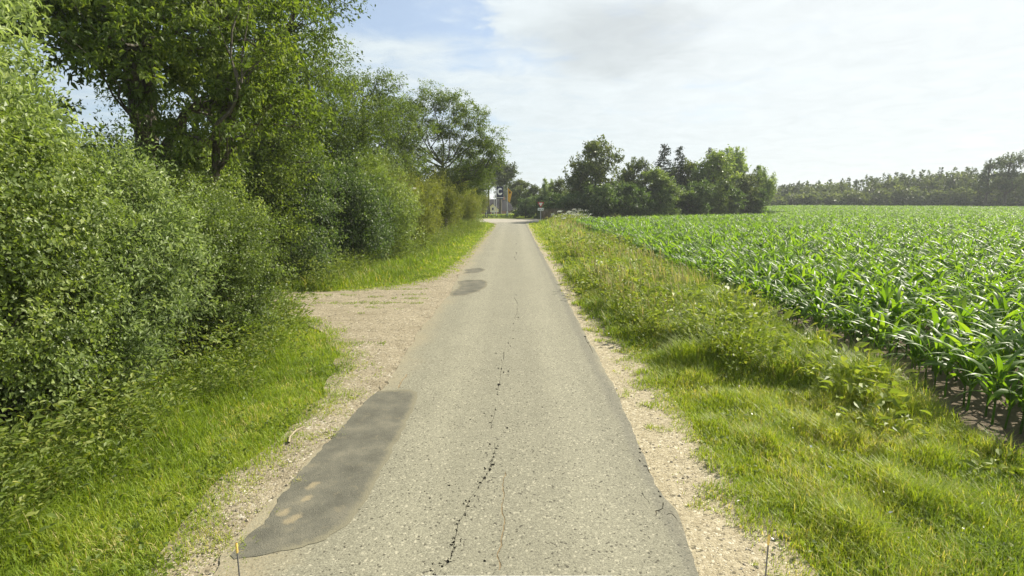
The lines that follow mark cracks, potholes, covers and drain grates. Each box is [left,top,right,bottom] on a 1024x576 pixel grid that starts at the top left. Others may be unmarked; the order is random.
crack [429,252,519,576]
